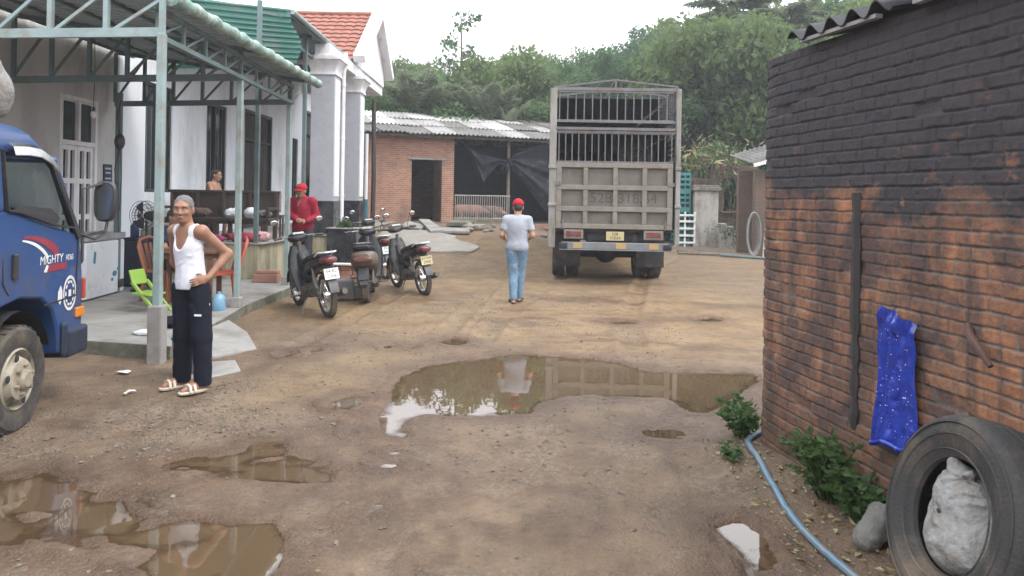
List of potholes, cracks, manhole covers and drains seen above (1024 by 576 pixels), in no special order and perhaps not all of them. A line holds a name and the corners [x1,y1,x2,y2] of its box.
pothole [137,435,362,492]
pothole [0,465,309,576]
pothole [361,351,763,445]
pothole [424,335,479,347]
